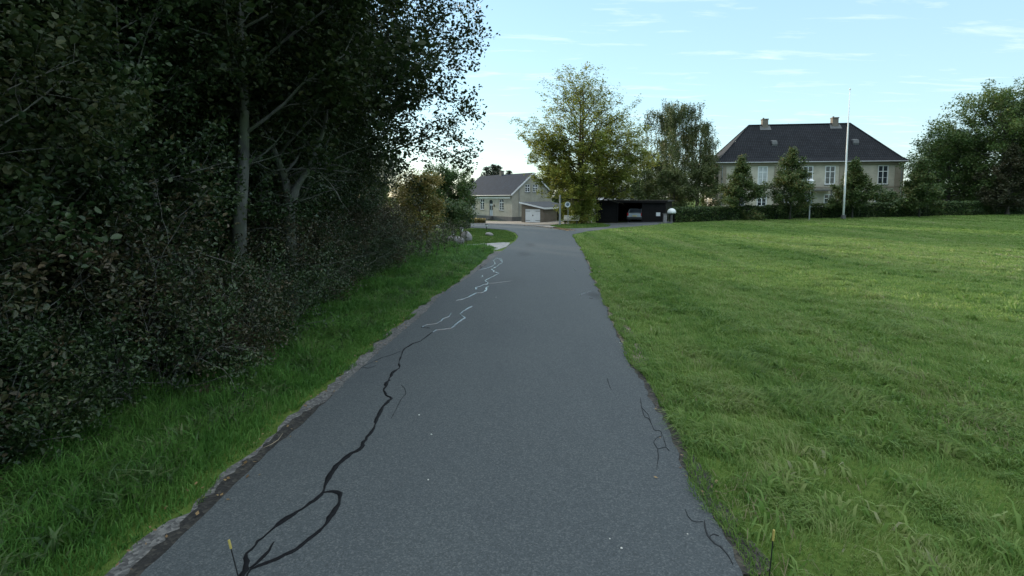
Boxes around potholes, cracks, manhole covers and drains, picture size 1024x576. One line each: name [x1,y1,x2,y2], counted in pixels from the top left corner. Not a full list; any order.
crack [685,509,733,564]
crack [640,397,670,465]
